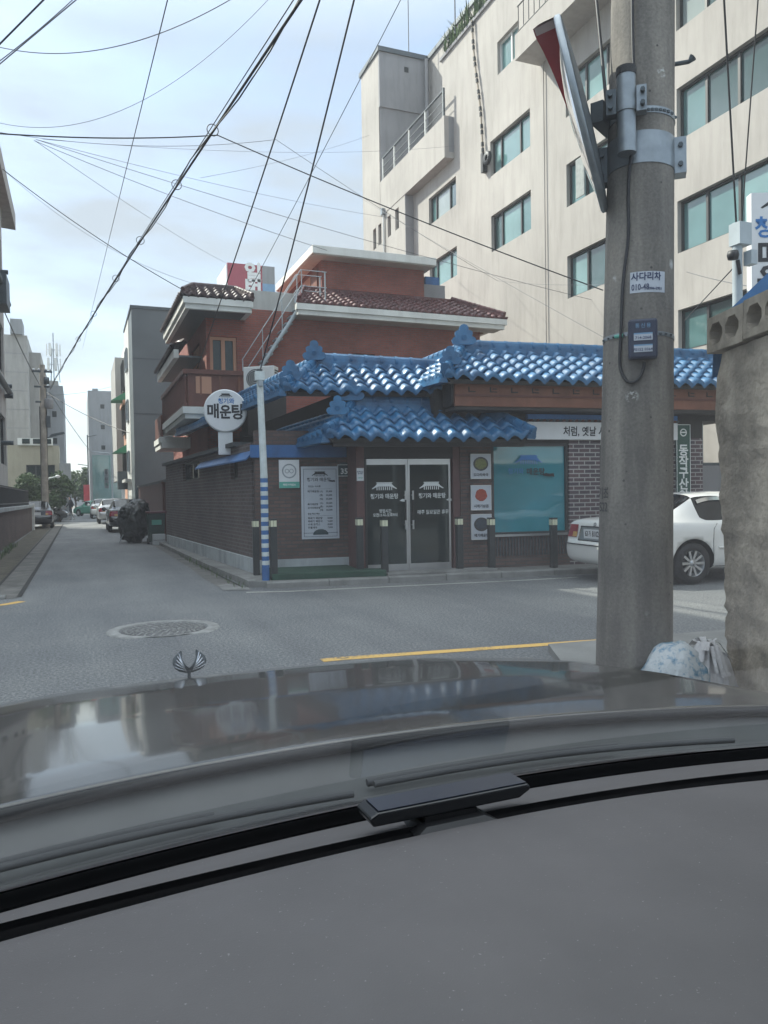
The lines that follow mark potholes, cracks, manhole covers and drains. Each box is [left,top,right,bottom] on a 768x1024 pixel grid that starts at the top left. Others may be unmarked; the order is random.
manhole cover [106,620,220,639]
